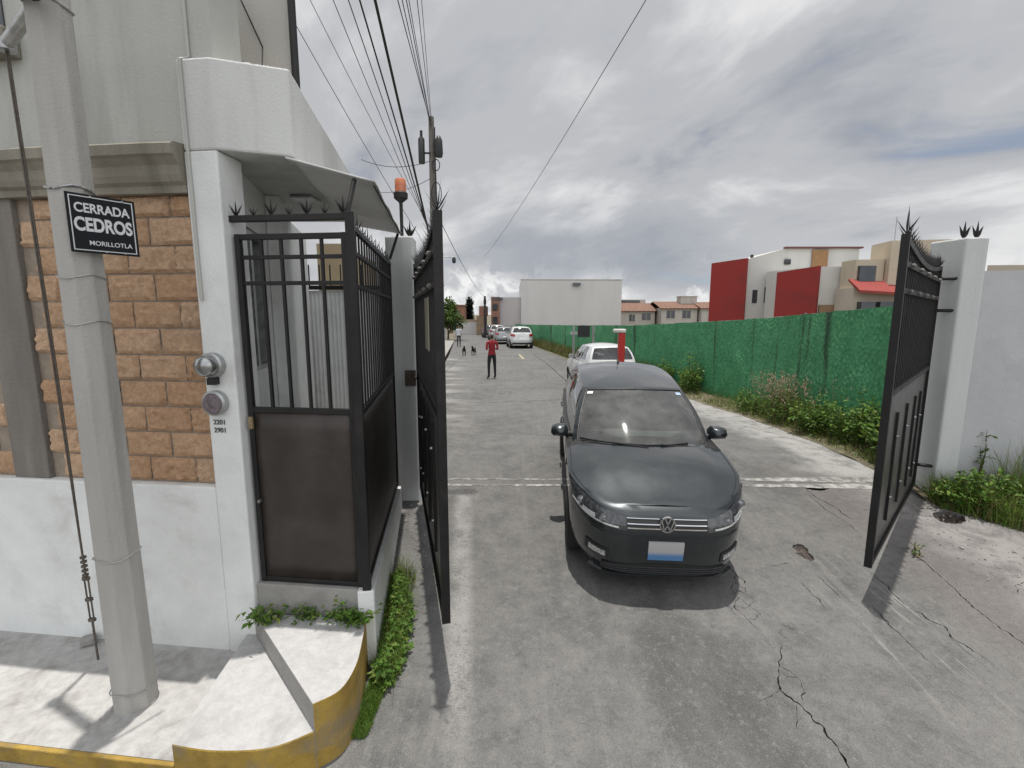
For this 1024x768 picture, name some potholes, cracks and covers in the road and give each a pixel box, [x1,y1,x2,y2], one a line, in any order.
pothole [933,511,966,524]
crack [765,625,850,768]
crack [870,574,982,667]
pothole [792,544,814,561]
crack [887,546,1024,644]
crack [730,569,760,630]
